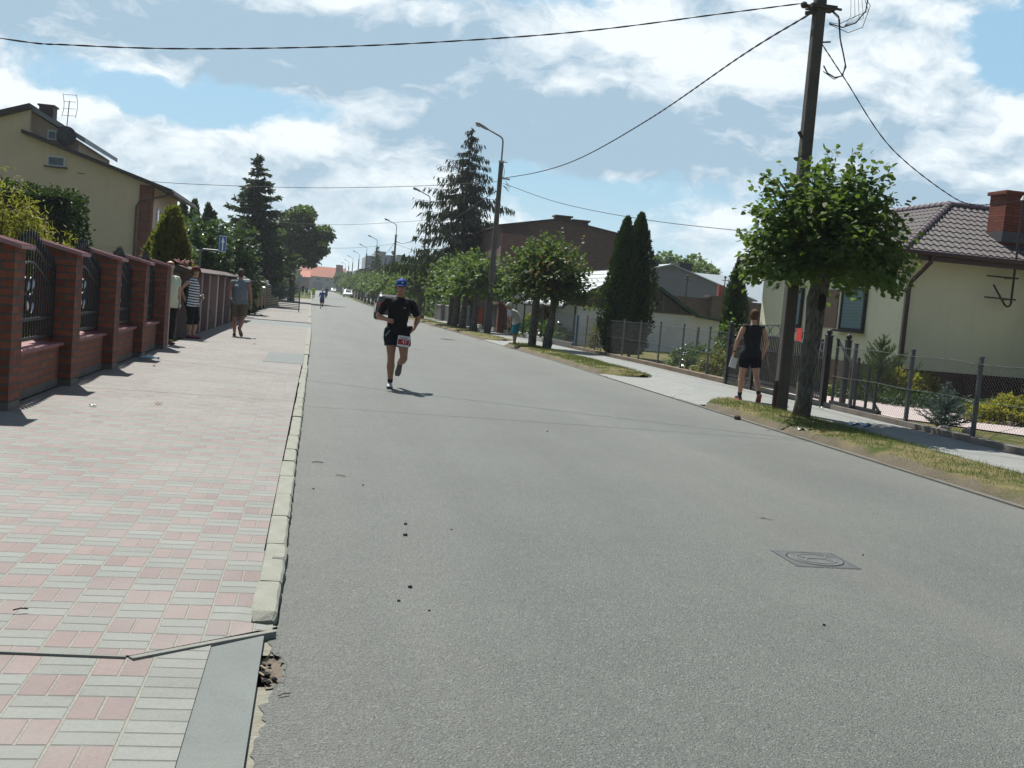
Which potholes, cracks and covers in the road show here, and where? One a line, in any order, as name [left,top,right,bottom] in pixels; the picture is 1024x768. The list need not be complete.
manhole cover [771,550,861,570]
pothole [259,652,287,690]
